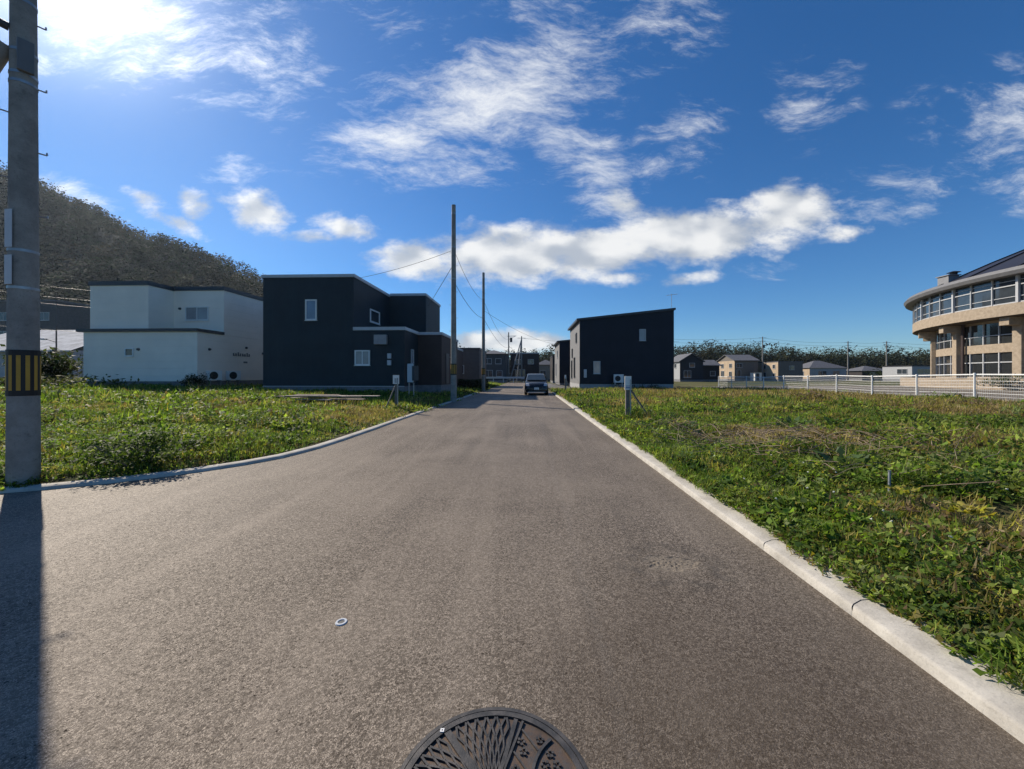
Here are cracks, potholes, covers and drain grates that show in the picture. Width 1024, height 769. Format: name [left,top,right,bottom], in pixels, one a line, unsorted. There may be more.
manhole cover [400,707,588,769]
